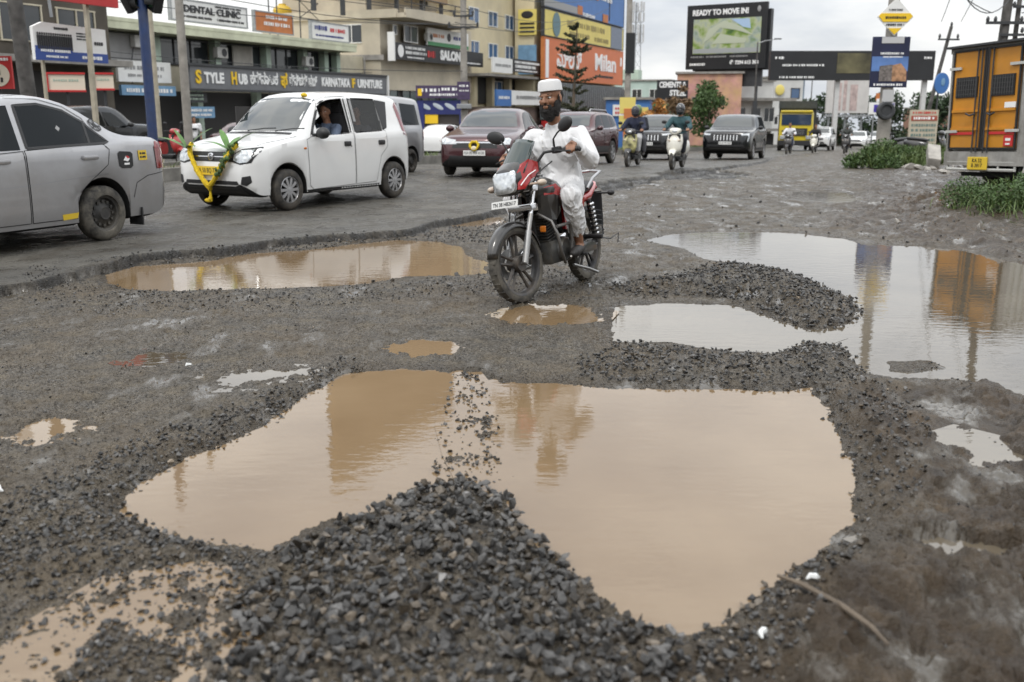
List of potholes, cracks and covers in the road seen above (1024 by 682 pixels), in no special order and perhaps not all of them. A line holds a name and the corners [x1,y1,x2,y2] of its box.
pothole [374,336,476,358]
pothole [97,238,490,291]
pothole [486,300,619,326]
pothole [0,409,98,448]
pothole [94,362,488,558]
pothole [600,299,847,354]
pothole [640,230,1024,399]
pothole [915,424,1024,467]
pothole [0,560,275,682]
pothole [435,377,888,646]
